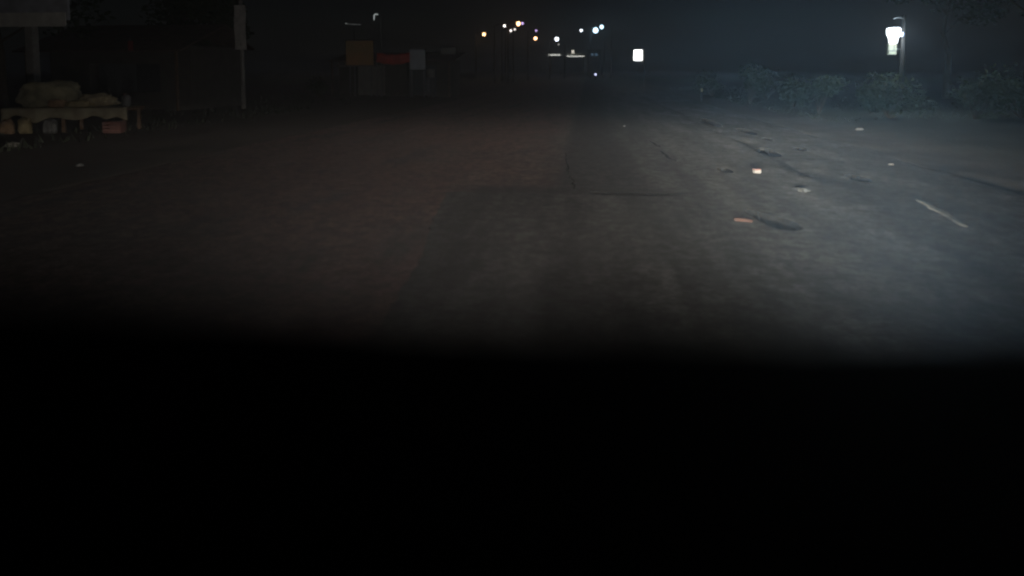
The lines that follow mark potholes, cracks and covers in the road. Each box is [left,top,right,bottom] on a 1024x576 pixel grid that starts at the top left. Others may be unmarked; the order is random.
pothole [755,148,782,157]
crack [563,152,576,189]
pothole [744,209,803,231]
crack [649,140,677,161]
